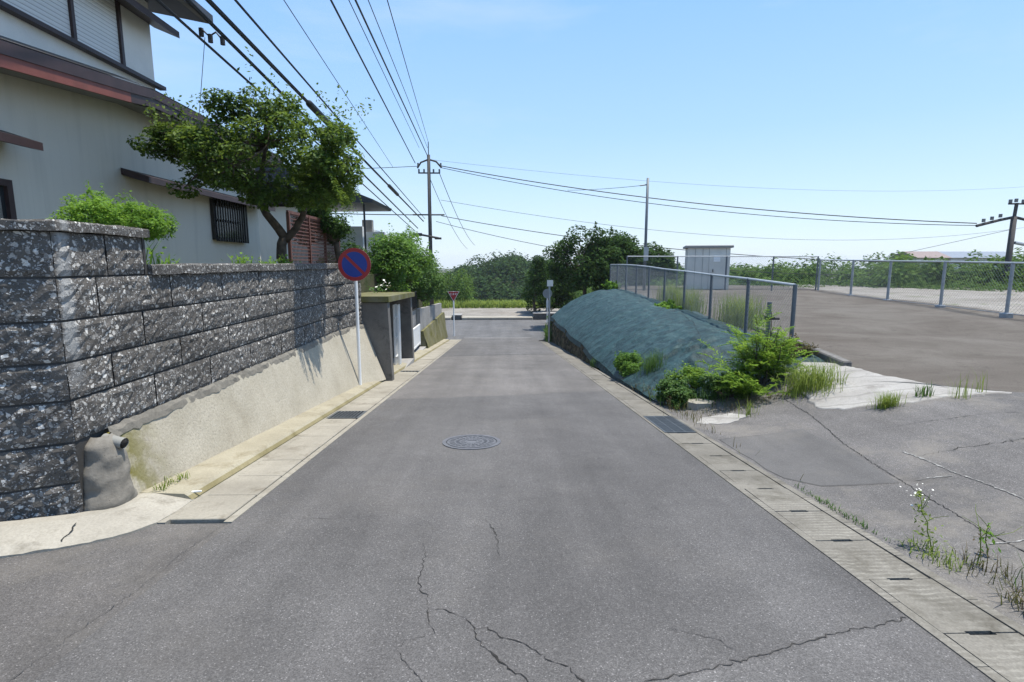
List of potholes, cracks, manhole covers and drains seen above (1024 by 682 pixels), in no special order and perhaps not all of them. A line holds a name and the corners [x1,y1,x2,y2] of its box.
crack [784,398,1024,551]
drain grate [326,411,367,420]
drain grate [643,416,696,433]
manhole cover [442,434,501,450]
crack [397,547,585,682]
